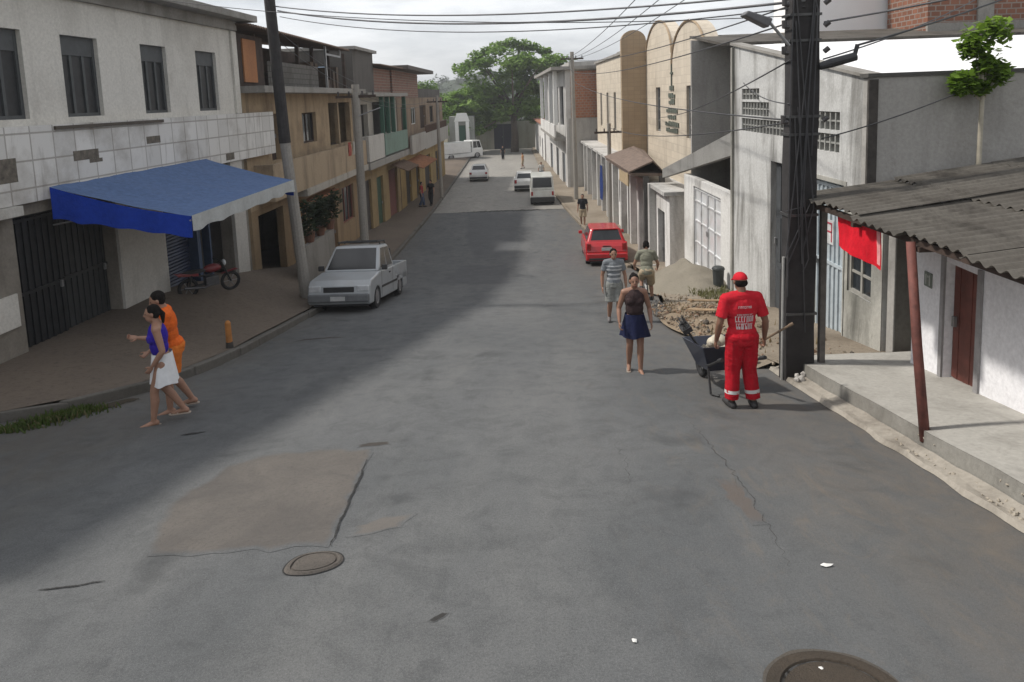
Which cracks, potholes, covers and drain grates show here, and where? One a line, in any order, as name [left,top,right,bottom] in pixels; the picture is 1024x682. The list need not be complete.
manhole cover [763,649,899,682]
crack [330,459,367,546]
crack [703,436,789,565]
manhole cover [282,551,344,576]
